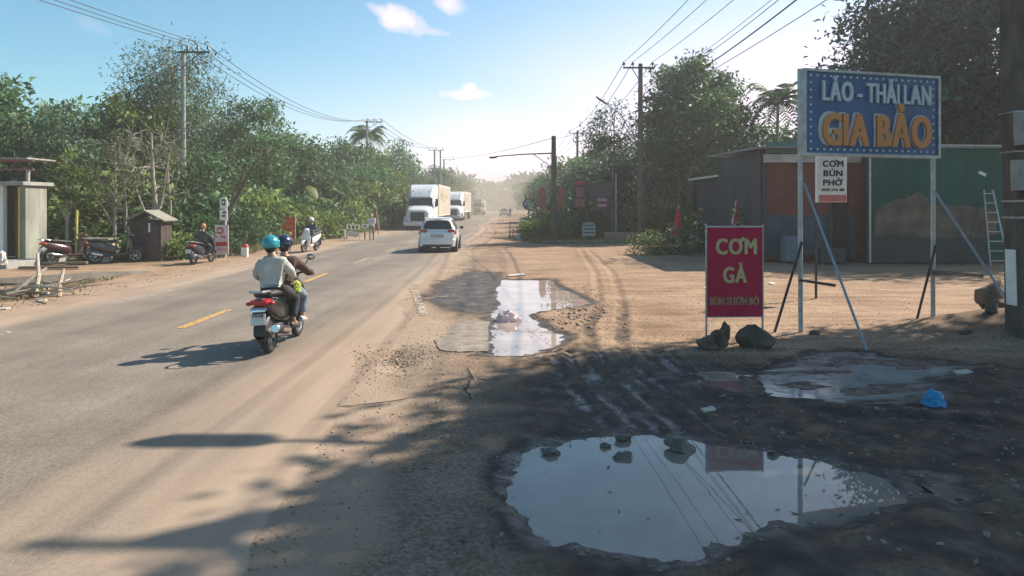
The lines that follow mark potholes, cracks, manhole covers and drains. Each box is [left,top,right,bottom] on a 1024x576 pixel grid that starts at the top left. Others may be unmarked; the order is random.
pothole [464,421,953,576]
pothole [471,278,607,360]
pothole [749,348,994,410]
pothole [682,363,761,394]
crack [439,347,580,399]
